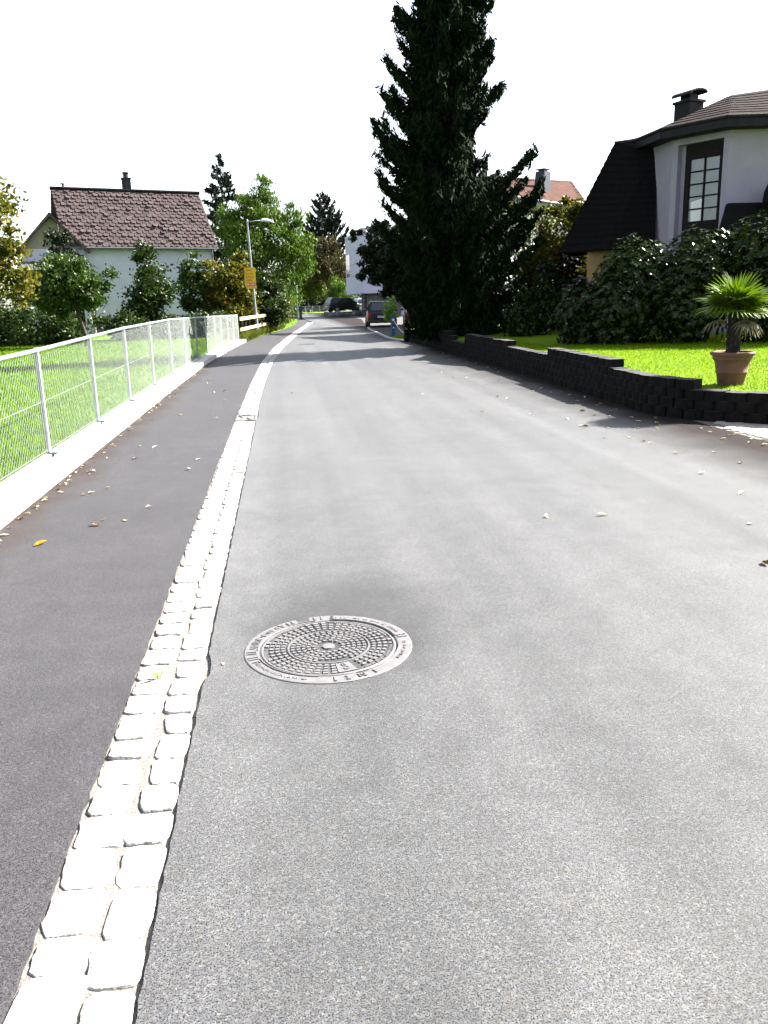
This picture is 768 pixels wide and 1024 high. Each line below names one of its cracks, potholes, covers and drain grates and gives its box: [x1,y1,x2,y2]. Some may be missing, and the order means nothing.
manhole cover [244,616,412,684]
